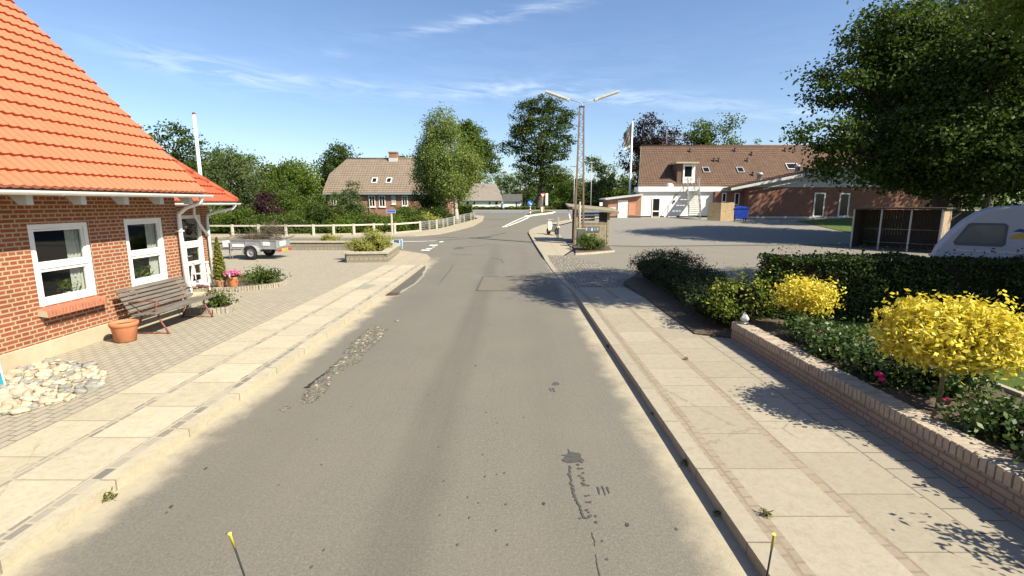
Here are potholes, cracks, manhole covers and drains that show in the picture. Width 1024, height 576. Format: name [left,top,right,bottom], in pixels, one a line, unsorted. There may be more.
pothole [344,326,384,354]
pothole [327,354,364,375]
pothole [300,373,332,404]
crack [567,465,610,576]
